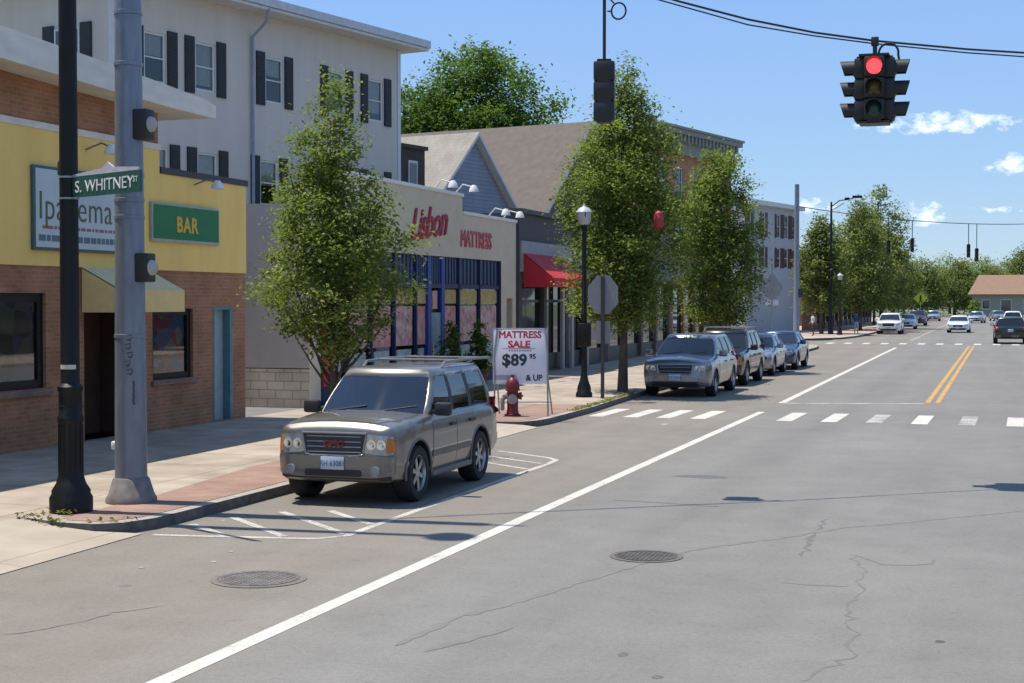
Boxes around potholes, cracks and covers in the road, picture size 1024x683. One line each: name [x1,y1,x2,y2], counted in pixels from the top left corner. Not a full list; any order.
crack [395,510,1024,681]
crack [1,605,163,635]
manhole cover [210,570,307,588]
manhole cover [610,550,683,563]
